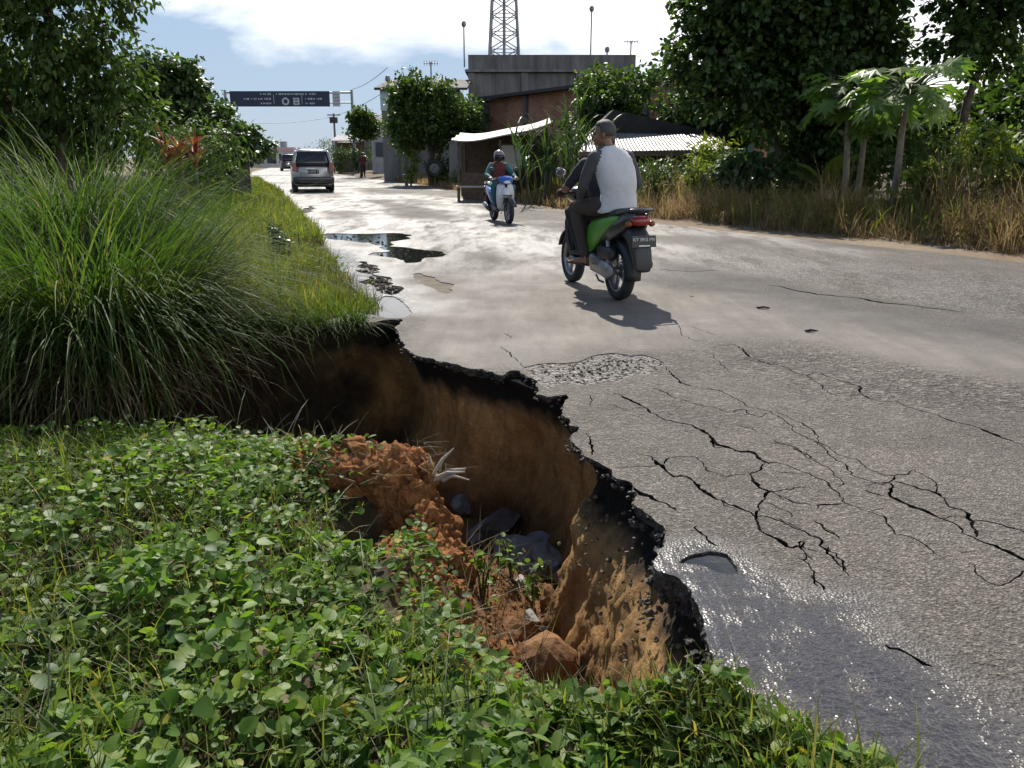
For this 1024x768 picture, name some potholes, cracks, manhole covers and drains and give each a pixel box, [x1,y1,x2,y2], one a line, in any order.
crack [678,325,1024,447]
pothole [1,316,714,708]
pothole [323,233,447,263]
crack [613,366,1024,590]
pothole [356,261,404,295]
pothole [678,551,738,574]
